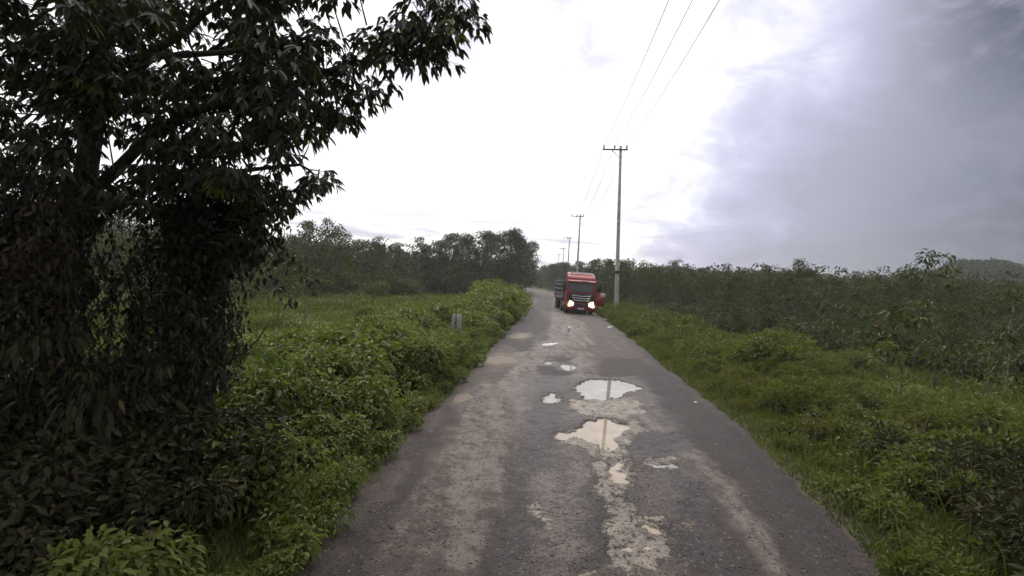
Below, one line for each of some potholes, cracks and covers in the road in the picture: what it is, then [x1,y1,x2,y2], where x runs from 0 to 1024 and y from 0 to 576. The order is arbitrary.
pothole [574,379,643,401]
pothole [538,392,563,404]
pothole [642,461,681,470]
pothole [602,459,636,522]
pothole [614,522,668,552]
pothole [554,417,634,452]
